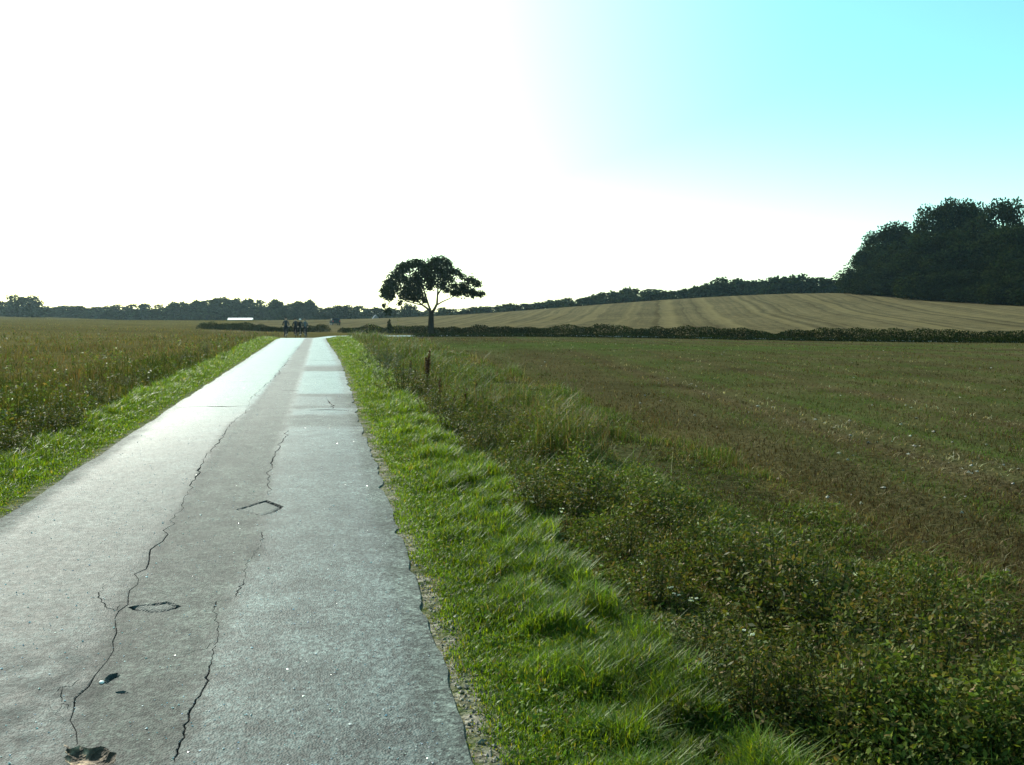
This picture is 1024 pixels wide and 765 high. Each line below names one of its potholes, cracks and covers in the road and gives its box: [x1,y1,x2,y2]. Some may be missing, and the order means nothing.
pothole [128,601,181,613]
